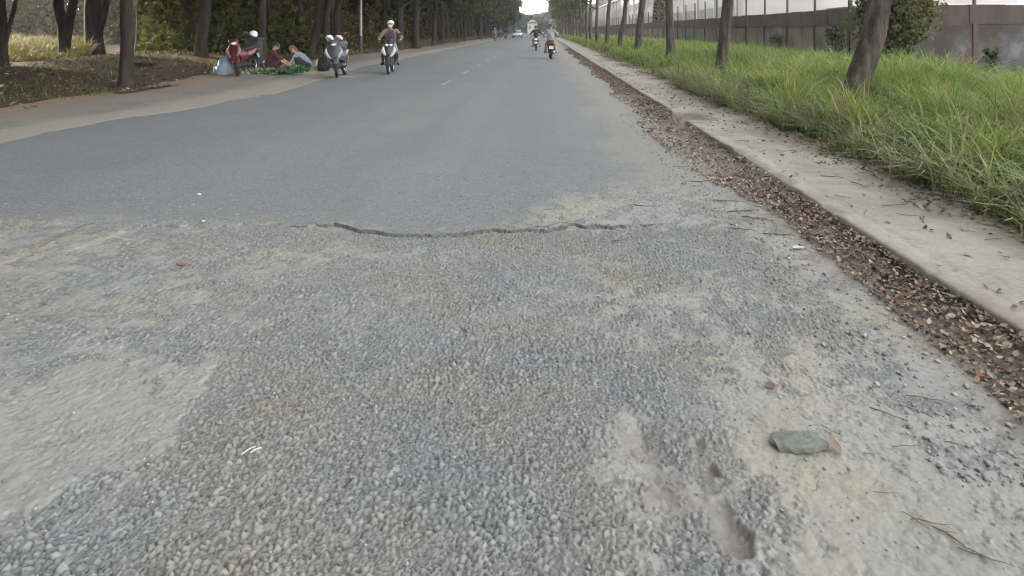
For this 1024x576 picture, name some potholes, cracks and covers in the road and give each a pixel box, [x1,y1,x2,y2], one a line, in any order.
crack [285,221,654,240]
